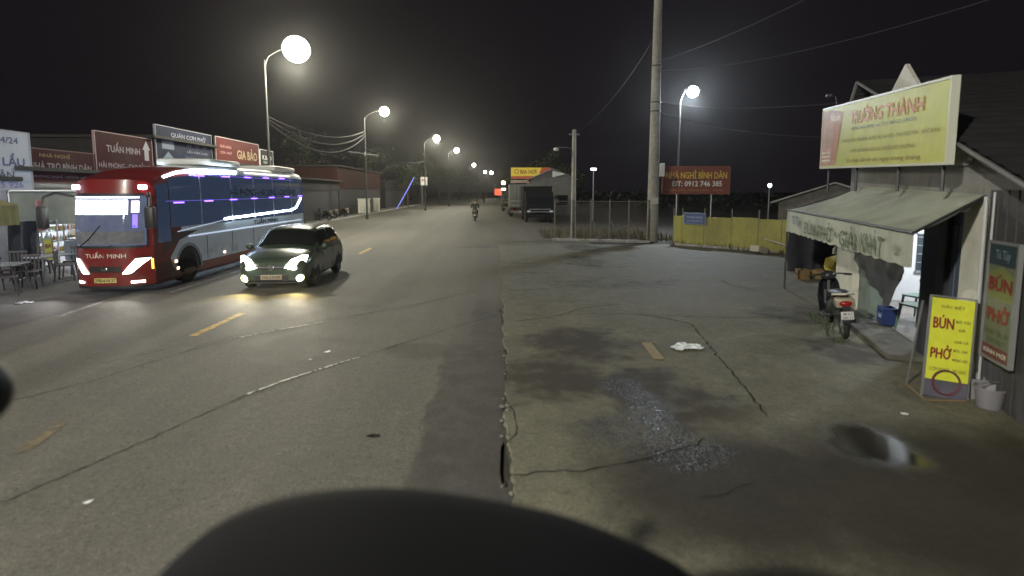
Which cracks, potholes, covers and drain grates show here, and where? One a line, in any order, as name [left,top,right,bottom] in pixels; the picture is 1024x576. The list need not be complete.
crack [698,480,755,498]
crack [1,315,496,502]
crack [507,438,703,477]
